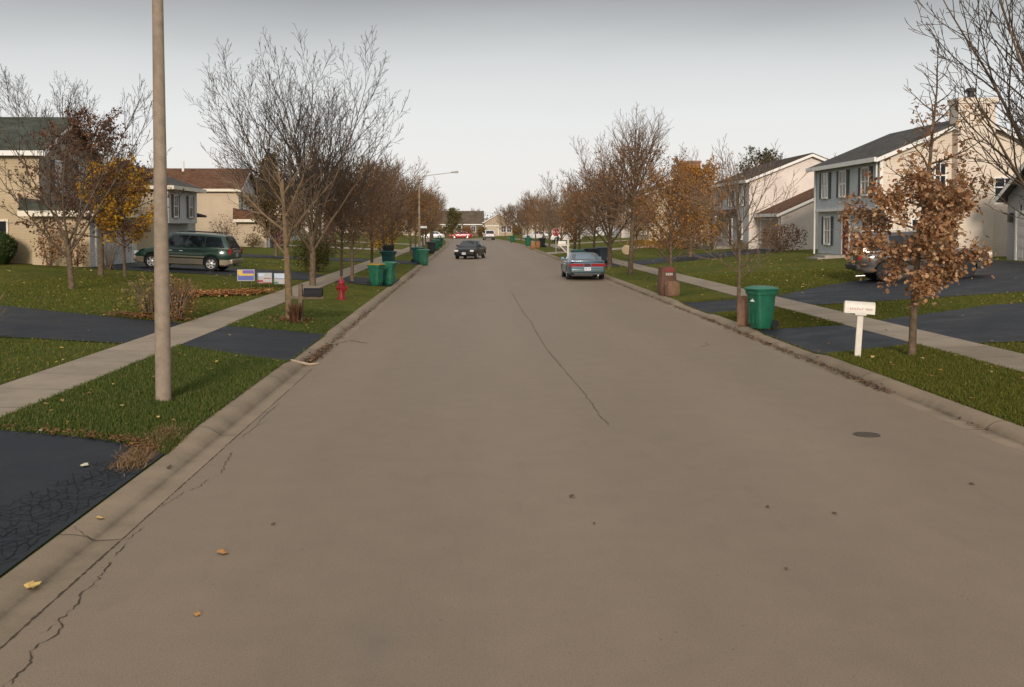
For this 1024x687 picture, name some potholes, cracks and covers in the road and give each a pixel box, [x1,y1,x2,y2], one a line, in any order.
crack [0,461,142,685]
crack [512,294,609,425]
